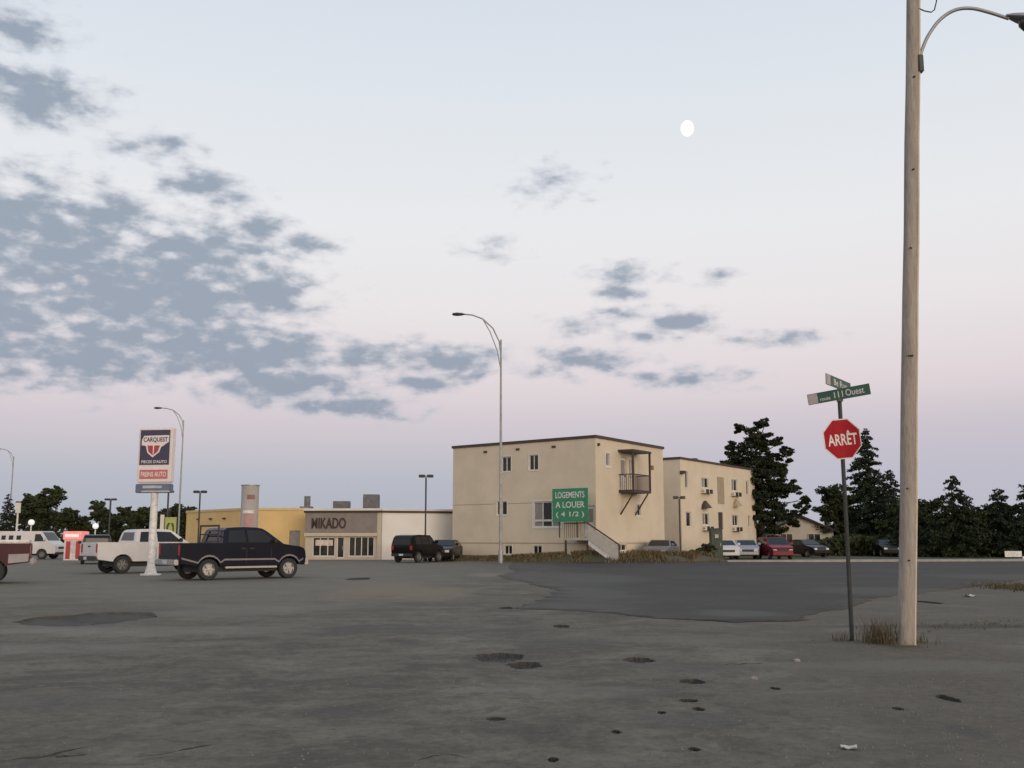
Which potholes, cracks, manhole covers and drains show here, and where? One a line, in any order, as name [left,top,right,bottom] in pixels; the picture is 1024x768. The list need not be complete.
pothole [935,694,962,703]
pothole [474,653,524,663]
crack [12,746,90,760]
crack [140,744,212,757]
